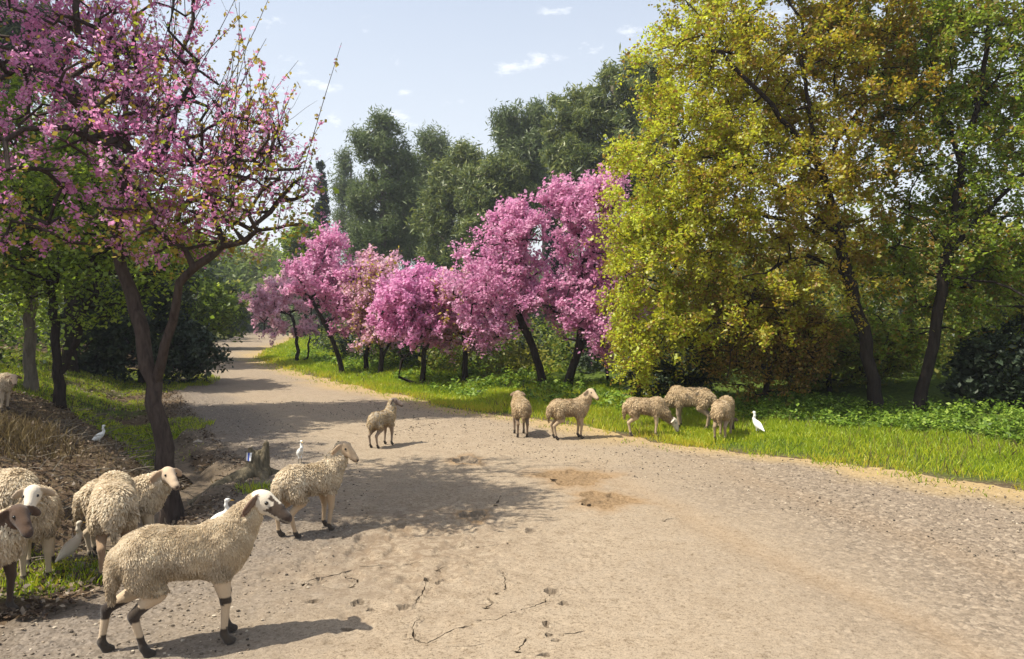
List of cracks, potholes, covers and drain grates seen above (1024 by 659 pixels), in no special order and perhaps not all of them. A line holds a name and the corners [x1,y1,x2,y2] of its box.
crack [300,561,552,653]
pothole [533,469,613,488]
pothole [575,490,645,510]
pothole [449,455,481,465]
